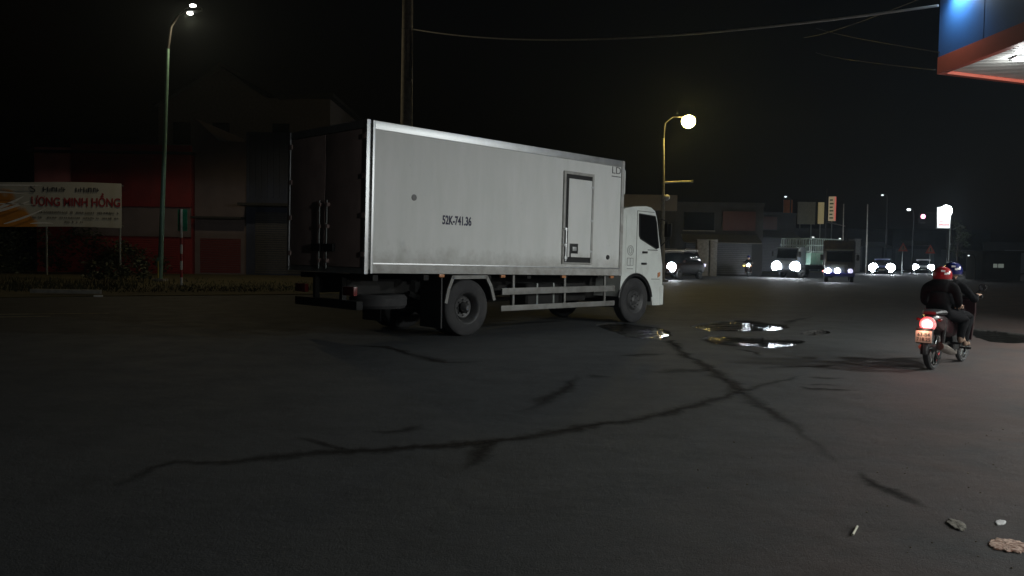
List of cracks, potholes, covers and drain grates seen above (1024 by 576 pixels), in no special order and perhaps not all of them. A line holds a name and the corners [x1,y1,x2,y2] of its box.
pothole [701,336,805,346]
pothole [596,323,672,339]
crack [787,365,841,390]
crack [194,340,784,463]
pothole [690,320,789,332]
